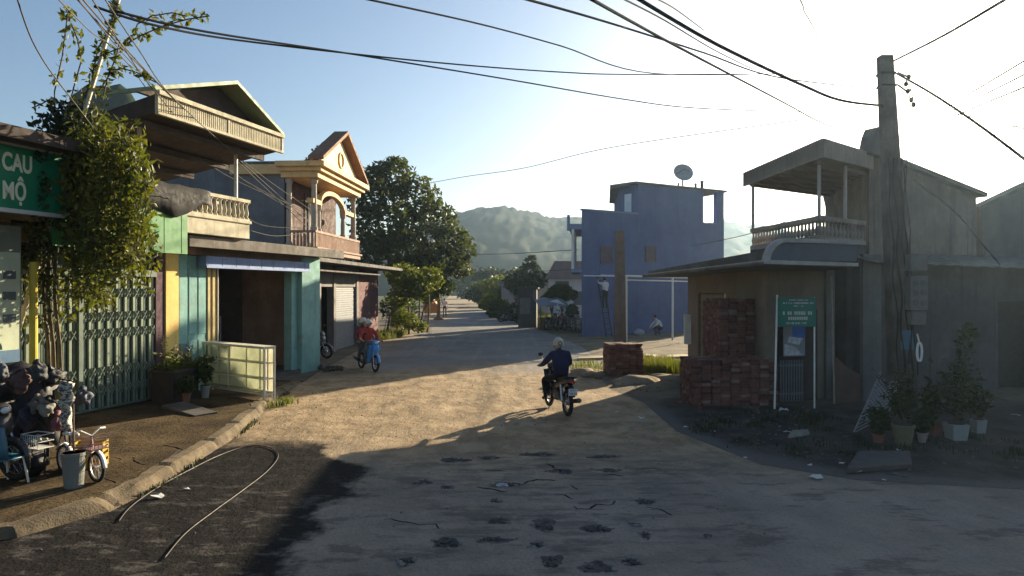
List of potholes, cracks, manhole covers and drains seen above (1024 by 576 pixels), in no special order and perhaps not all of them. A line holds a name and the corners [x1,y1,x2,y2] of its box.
crack [478,464,615,509]
pothole [540,555,564,569]
pothole [529,517,557,532]
pothole [476,536,518,544]
pothole [621,556,646,566]
pothole [487,516,511,525]
pothole [579,522,615,533]
pothole [395,556,417,567]
pothole [431,536,463,549]
